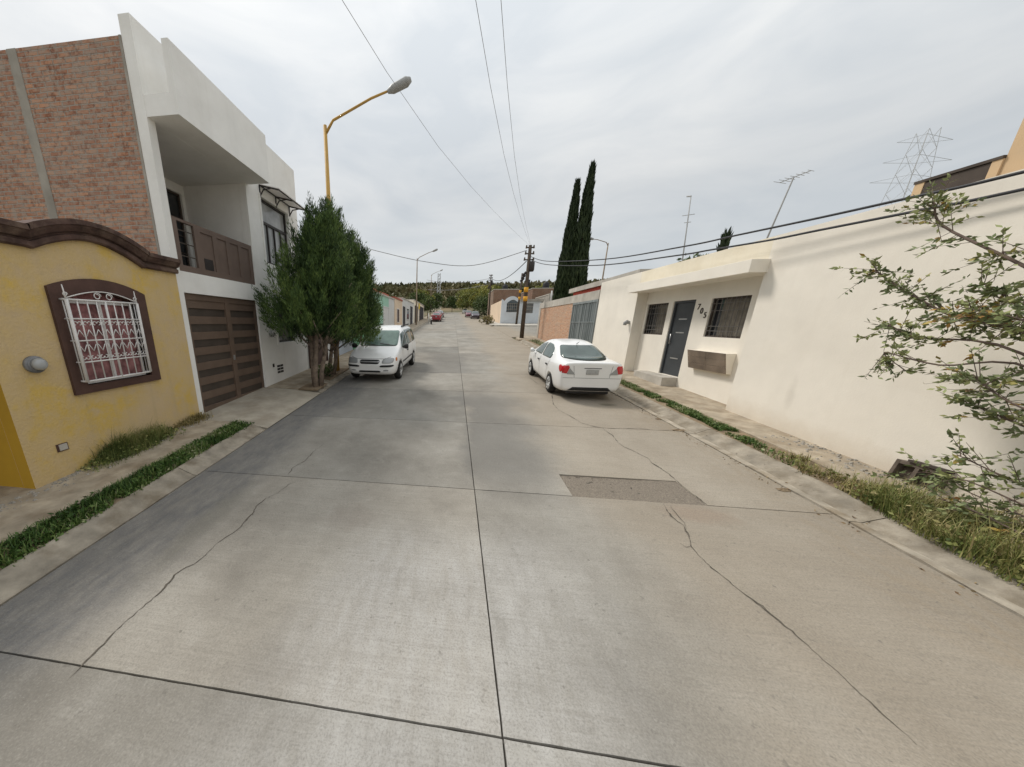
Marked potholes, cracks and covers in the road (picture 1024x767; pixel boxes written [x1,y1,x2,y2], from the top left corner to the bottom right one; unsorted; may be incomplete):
crack [75,445,322,673]
crack [534,381,916,744]
